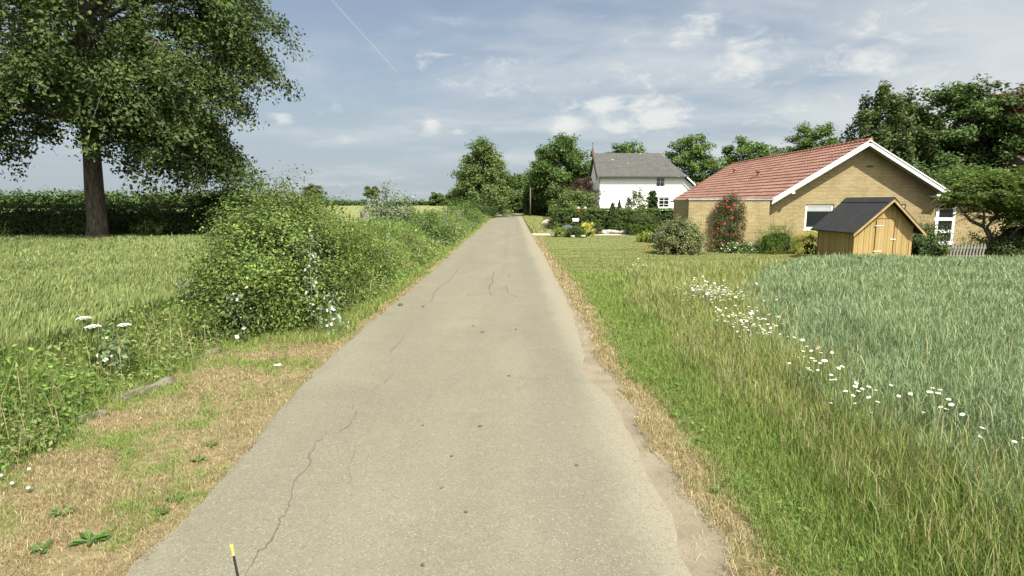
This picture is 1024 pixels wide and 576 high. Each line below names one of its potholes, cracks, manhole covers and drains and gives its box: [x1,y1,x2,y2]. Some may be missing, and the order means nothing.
crack [245,435,324,575]
